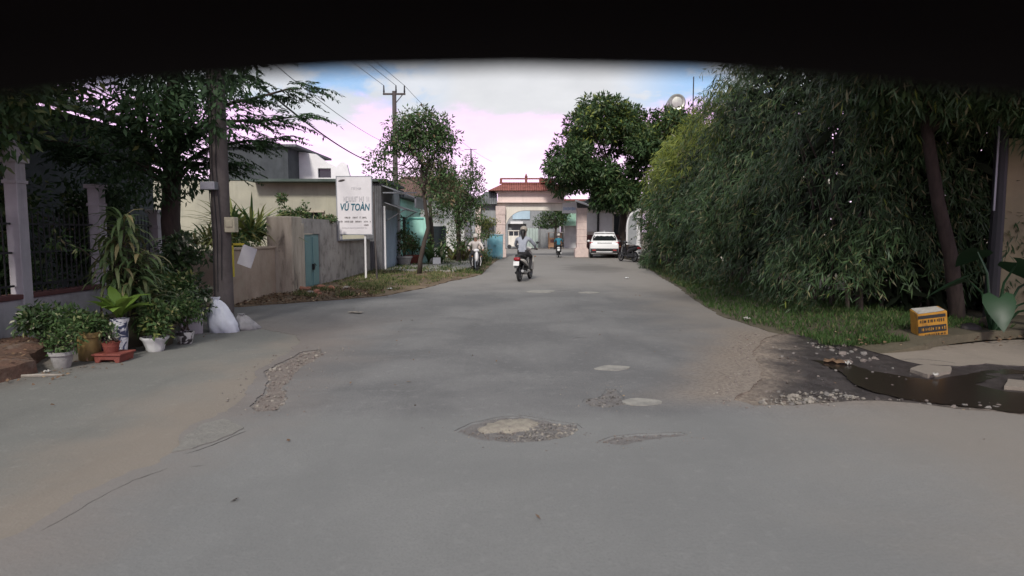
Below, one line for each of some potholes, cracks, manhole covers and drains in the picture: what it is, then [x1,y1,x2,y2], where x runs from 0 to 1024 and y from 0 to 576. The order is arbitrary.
pothole [422,411,613,451]
pothole [560,383,634,411]
pothole [706,334,1024,415]
pothole [221,347,356,416]
pothole [586,429,710,449]
